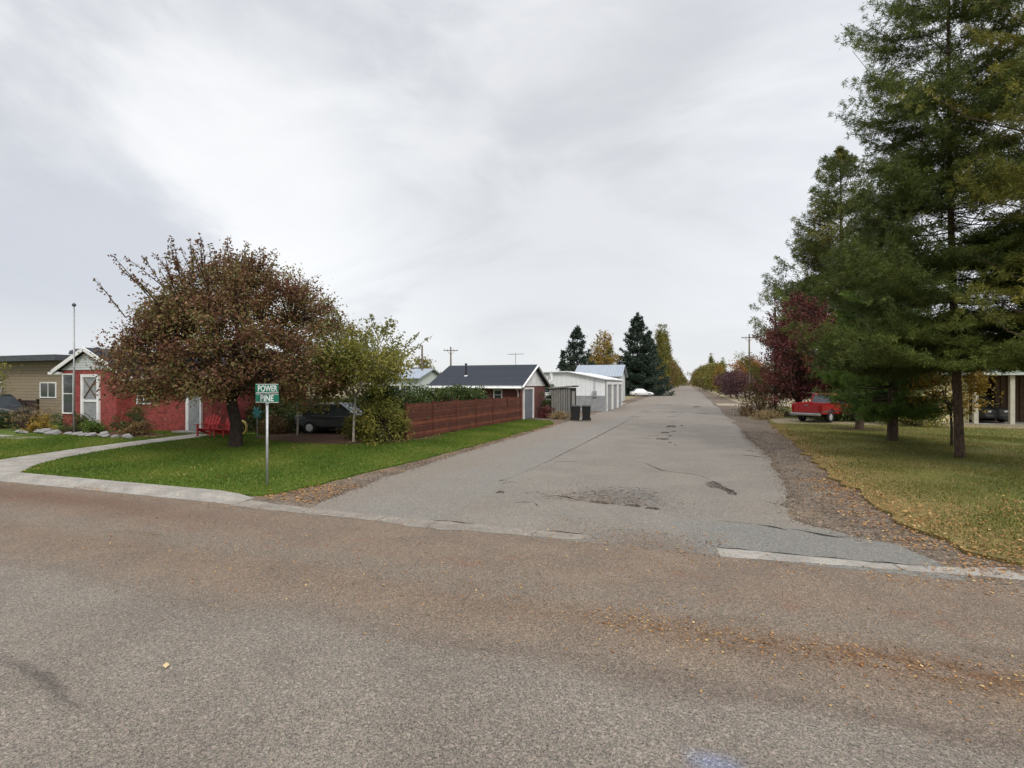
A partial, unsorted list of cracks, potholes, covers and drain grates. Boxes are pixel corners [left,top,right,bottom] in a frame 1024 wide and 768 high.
pothole [705,481,737,495]
crack [717,520,840,538]
